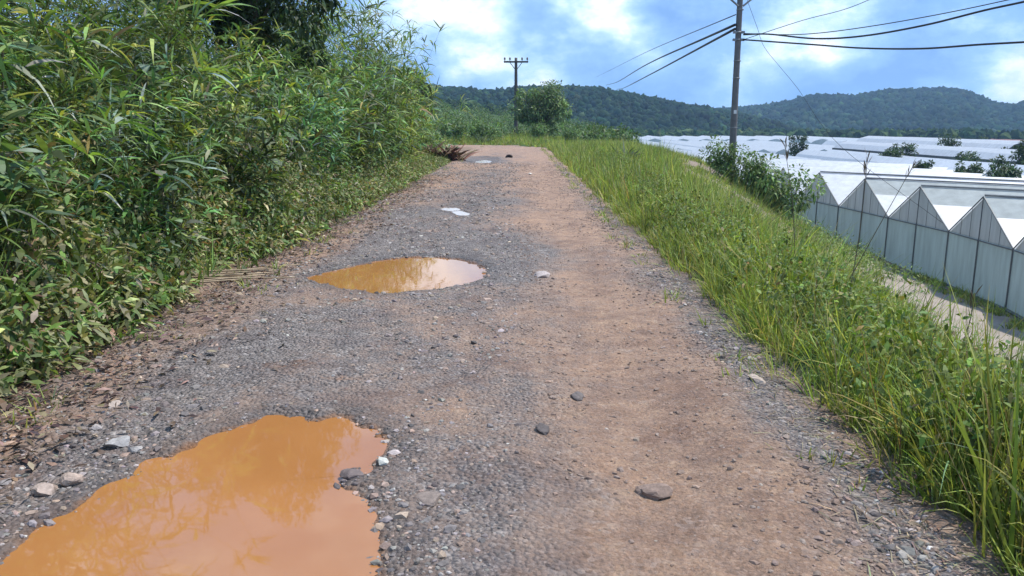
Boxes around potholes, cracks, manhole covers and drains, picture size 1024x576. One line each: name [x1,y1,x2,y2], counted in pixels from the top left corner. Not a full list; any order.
pothole [297,253,495,294]
pothole [0,406,416,576]
